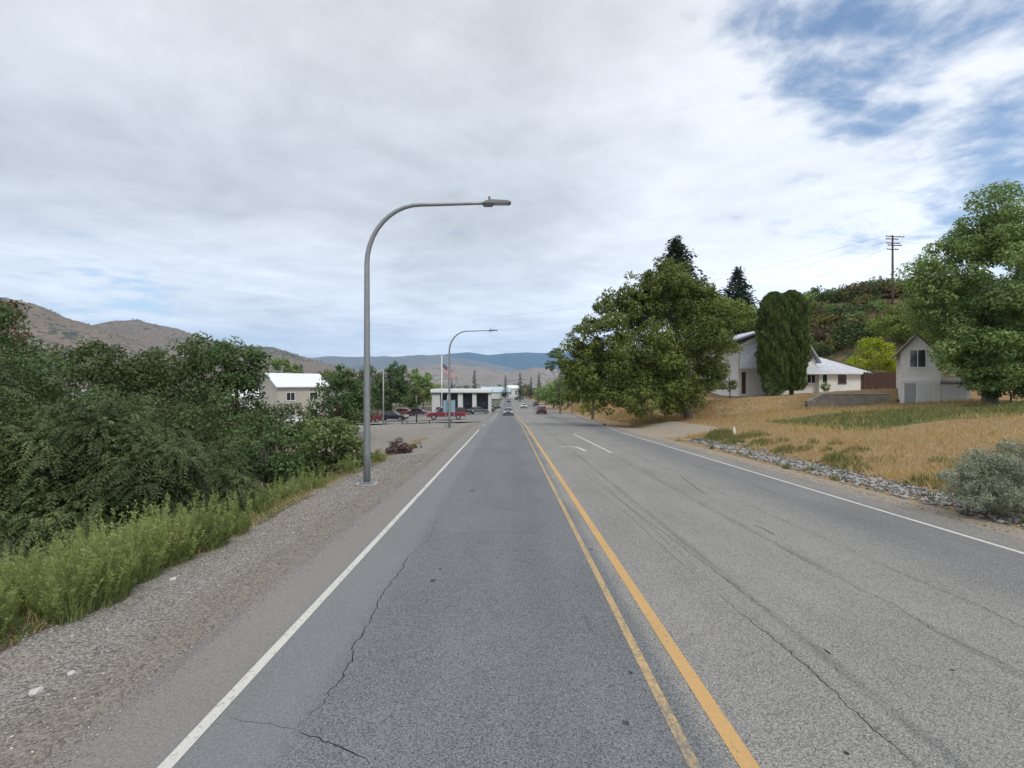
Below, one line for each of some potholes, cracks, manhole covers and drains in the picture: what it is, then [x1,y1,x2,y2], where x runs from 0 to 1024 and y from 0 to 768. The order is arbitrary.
crack [227,514,534,764]
